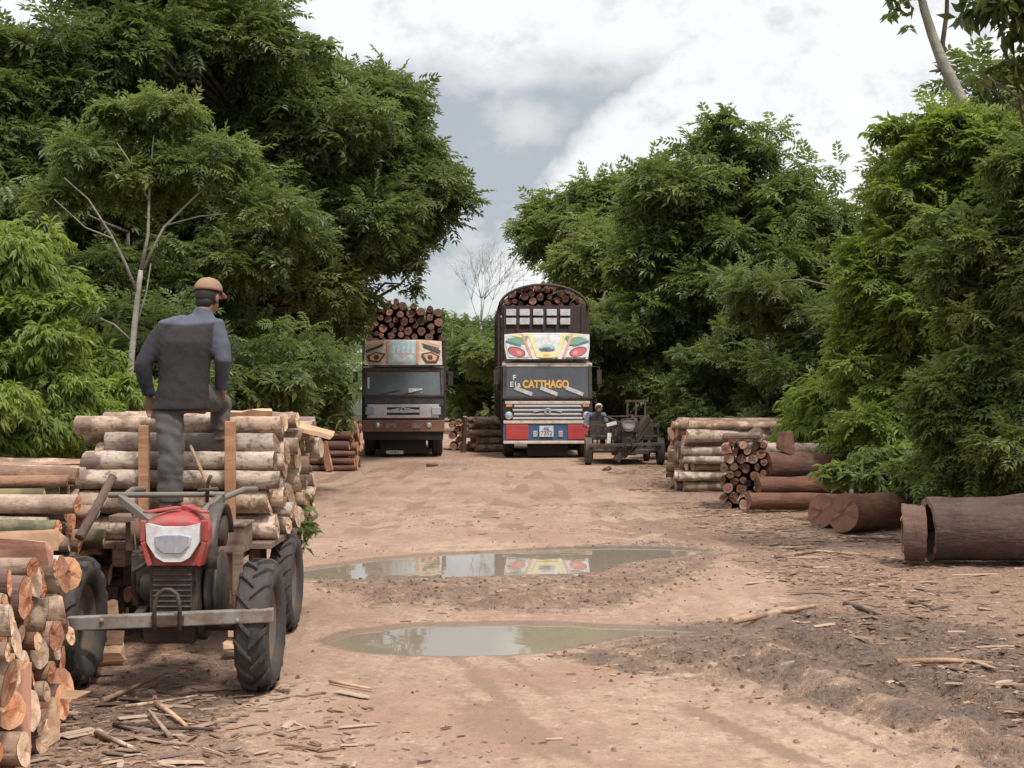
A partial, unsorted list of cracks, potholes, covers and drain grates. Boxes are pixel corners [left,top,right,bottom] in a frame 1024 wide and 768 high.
pothole [303,543,737,583]
pothole [285,614,745,665]
